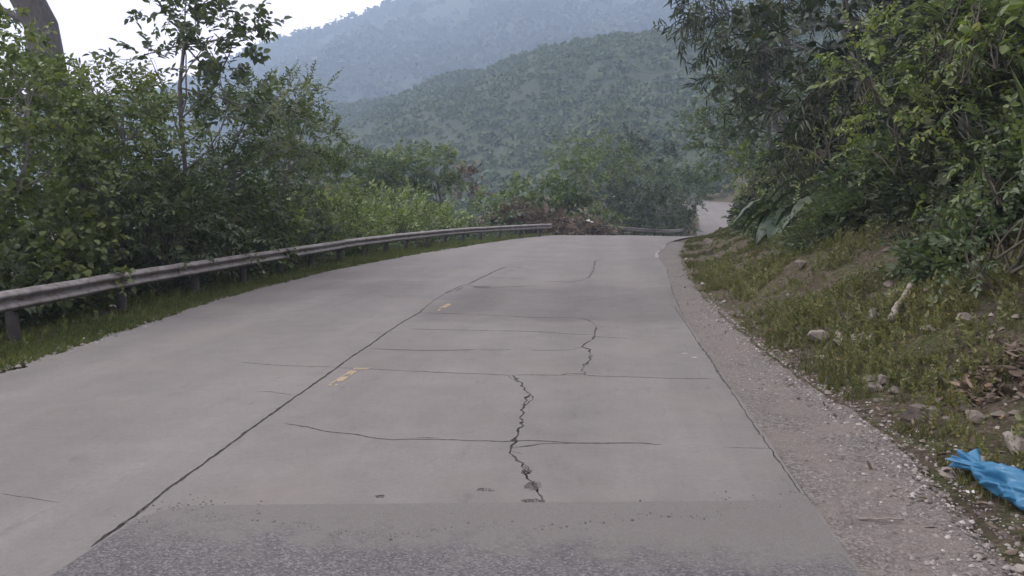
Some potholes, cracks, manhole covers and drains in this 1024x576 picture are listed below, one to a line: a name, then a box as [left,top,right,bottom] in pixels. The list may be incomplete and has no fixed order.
crack [91,267,705,547]
